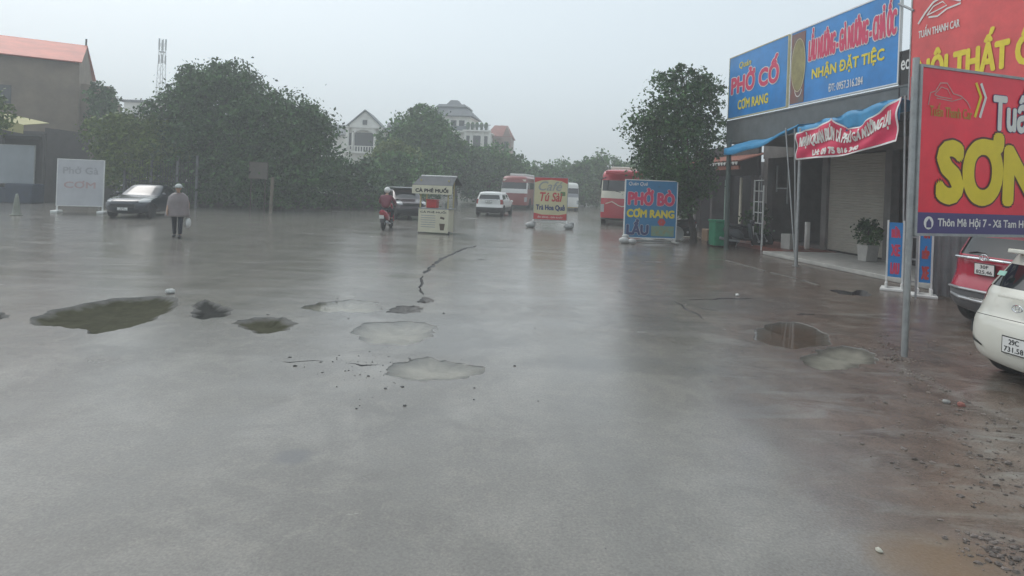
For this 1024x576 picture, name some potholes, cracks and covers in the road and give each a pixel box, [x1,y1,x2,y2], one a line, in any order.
pothole [191,300,234,320]
pothole [29,296,179,334]
pothole [232,317,299,334]
pothole [753,322,832,349]
crack [418,246,484,295]
crack [674,298,755,320]
pothole [386,305,424,314]
